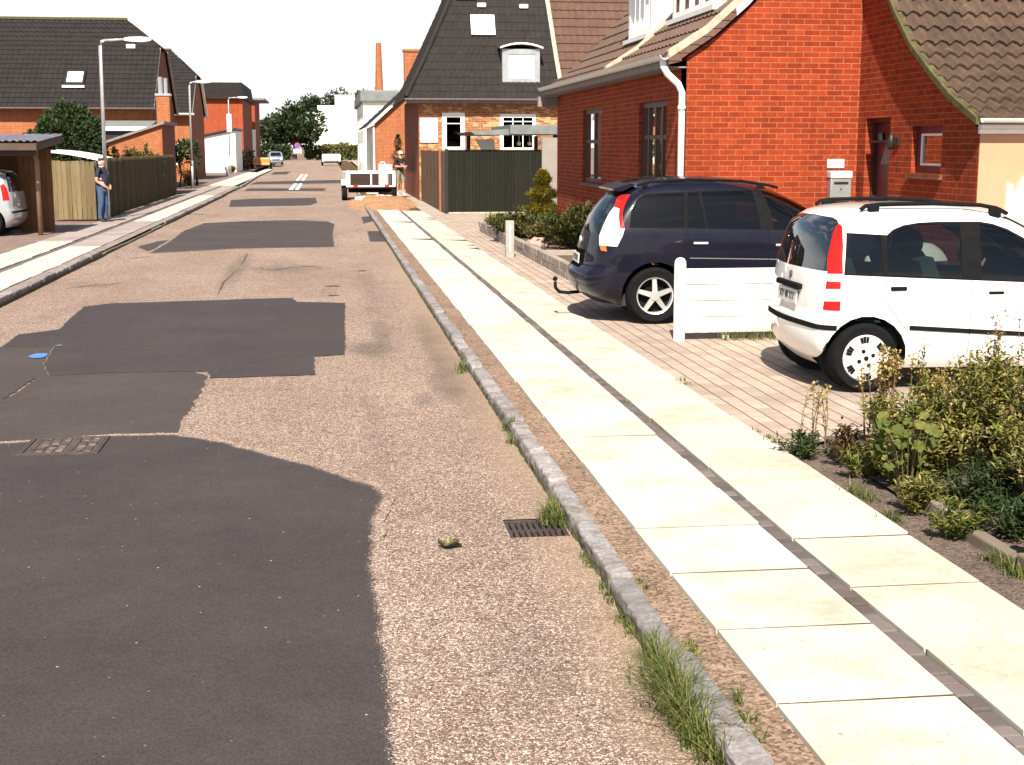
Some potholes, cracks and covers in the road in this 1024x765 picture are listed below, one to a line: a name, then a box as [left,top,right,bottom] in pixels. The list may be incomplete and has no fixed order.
crack [218,253,320,294]
drain grate [503,519,570,538]
